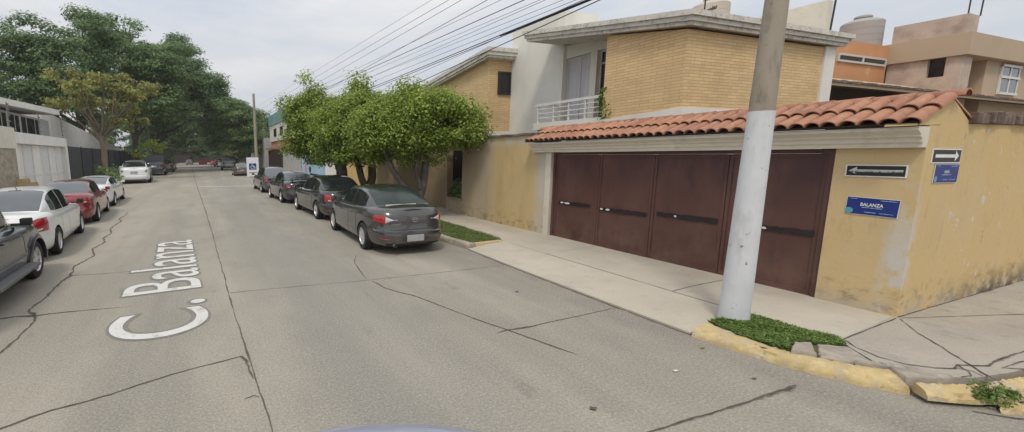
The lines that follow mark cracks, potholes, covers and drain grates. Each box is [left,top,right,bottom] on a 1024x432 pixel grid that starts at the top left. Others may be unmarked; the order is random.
crack [0,356,259,429]
crack [0,211,129,353]
crack [647,385,797,432]
crack [354,256,616,353]
